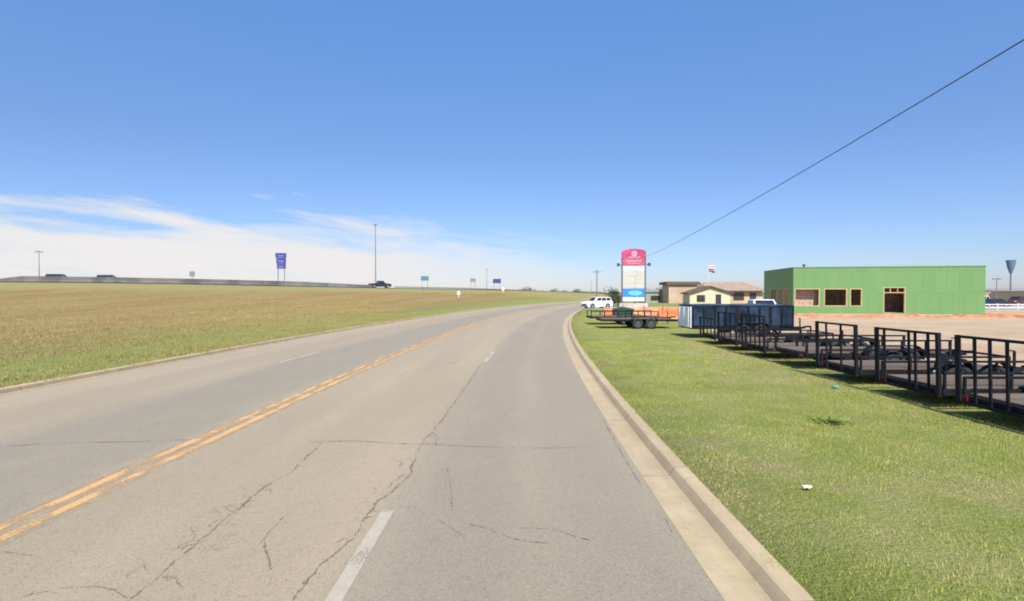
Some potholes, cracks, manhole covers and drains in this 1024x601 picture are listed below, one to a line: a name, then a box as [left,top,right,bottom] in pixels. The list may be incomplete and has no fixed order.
crack [21,361,546,601]
crack [453,524,588,543]
